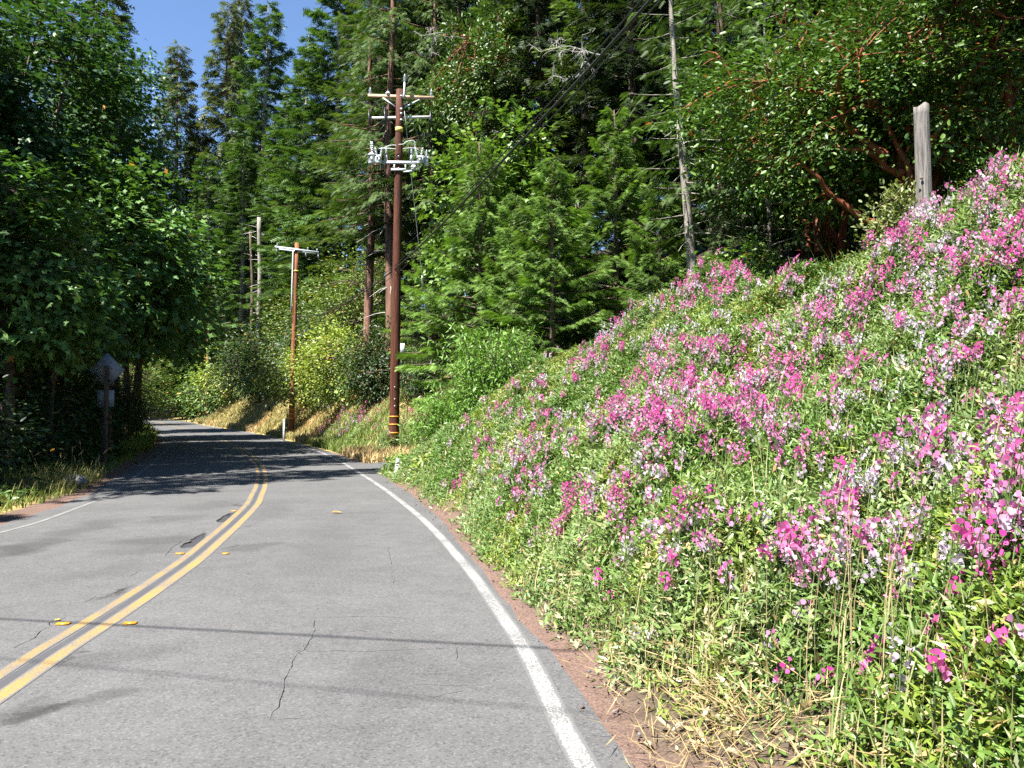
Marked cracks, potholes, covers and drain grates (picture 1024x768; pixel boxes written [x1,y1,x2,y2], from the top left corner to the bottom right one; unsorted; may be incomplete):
pothole [180,533,206,548]
crack [270,616,469,719]
